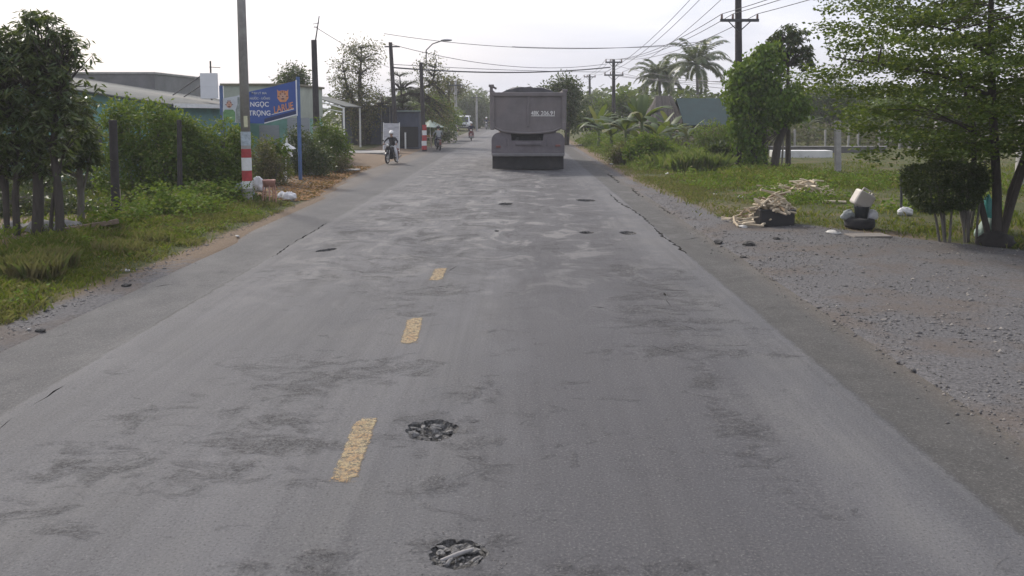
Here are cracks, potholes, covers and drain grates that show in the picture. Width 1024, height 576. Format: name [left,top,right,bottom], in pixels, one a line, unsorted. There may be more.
crack [607,173,699,253]
pothole [405,419,459,442]
pothole [428,539,489,570]
